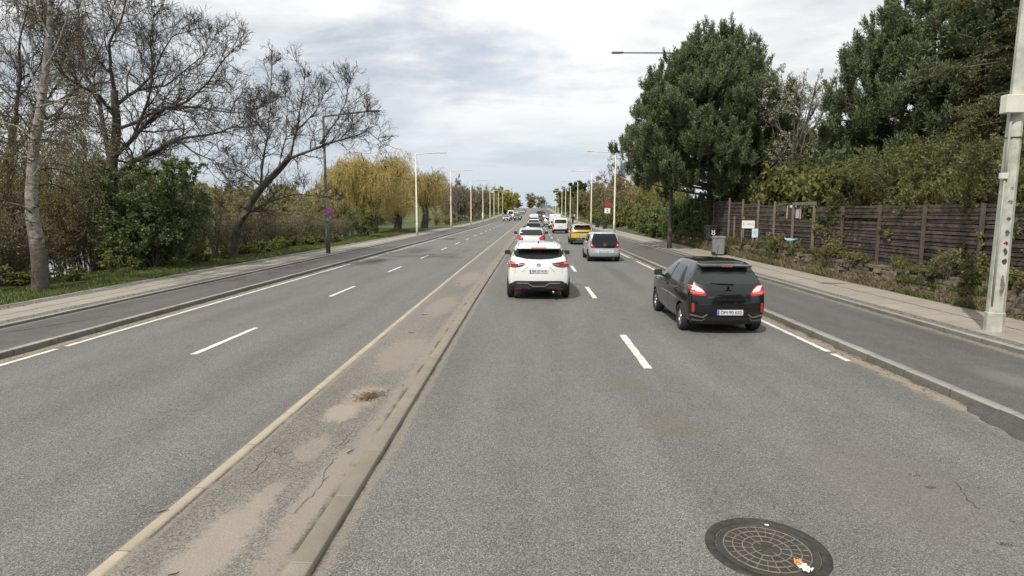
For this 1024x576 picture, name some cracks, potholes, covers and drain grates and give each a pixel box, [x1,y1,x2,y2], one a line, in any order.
manhole cover [705,518,833,576]
crack [294,431,352,513]
